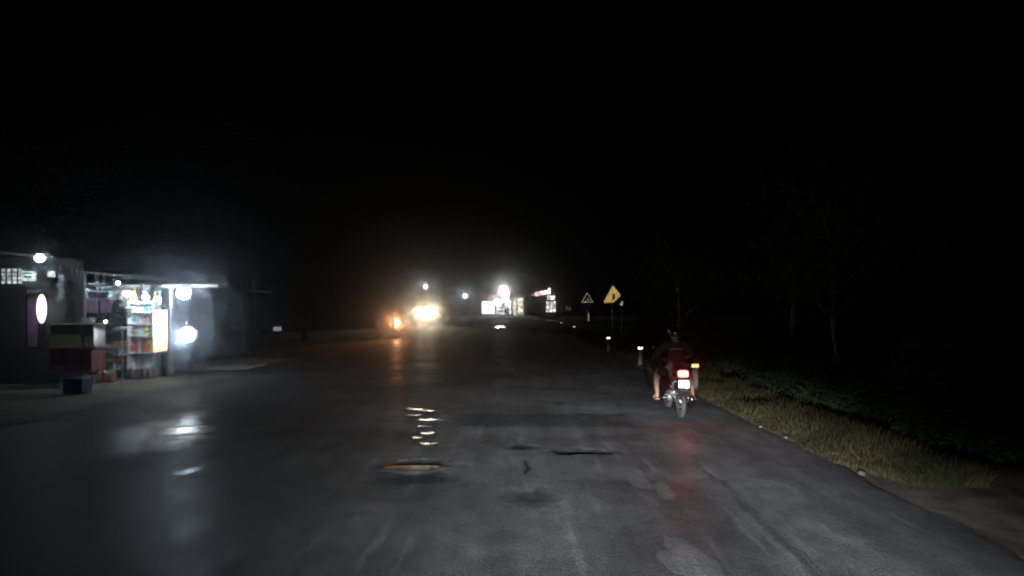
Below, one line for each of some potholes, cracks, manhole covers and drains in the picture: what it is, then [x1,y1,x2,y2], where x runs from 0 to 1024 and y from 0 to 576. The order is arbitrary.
pothole [375,457,454,475]
pothole [419,439,440,447]
crack [523,461,532,474]
pothole [544,447,627,456]
pothole [498,486,565,512]
